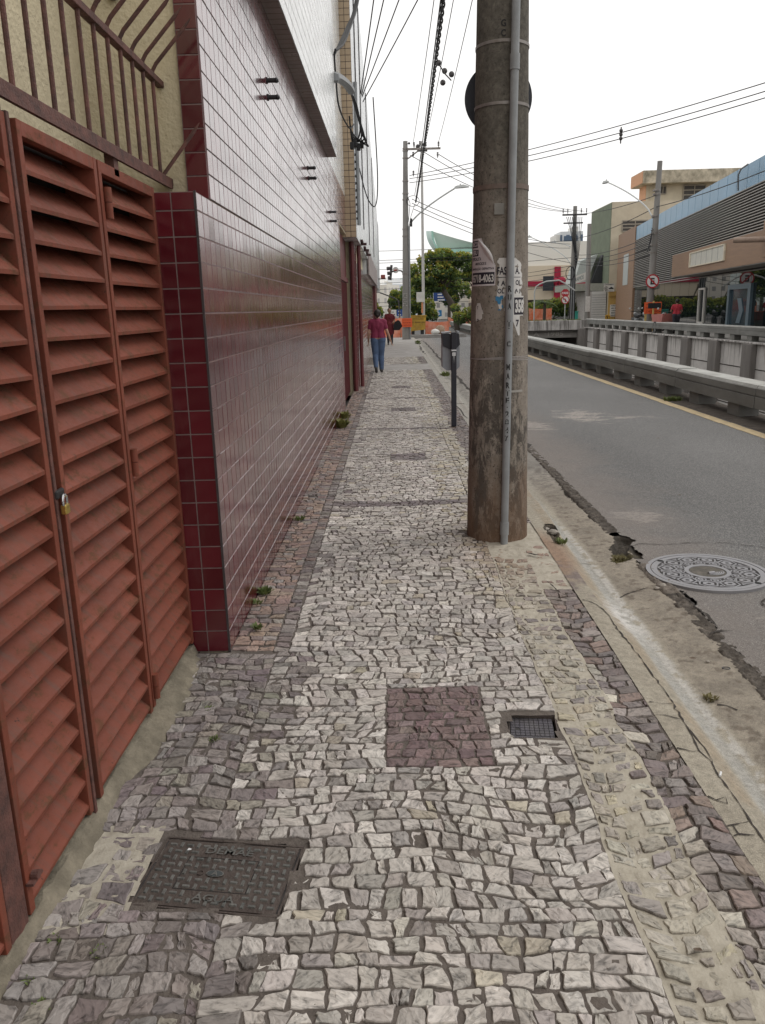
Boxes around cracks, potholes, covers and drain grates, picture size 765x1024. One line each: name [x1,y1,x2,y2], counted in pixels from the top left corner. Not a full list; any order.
manhole cover [128,836,304,918]
manhole cover [646,553,765,600]
pothole [608,536,643,564]
